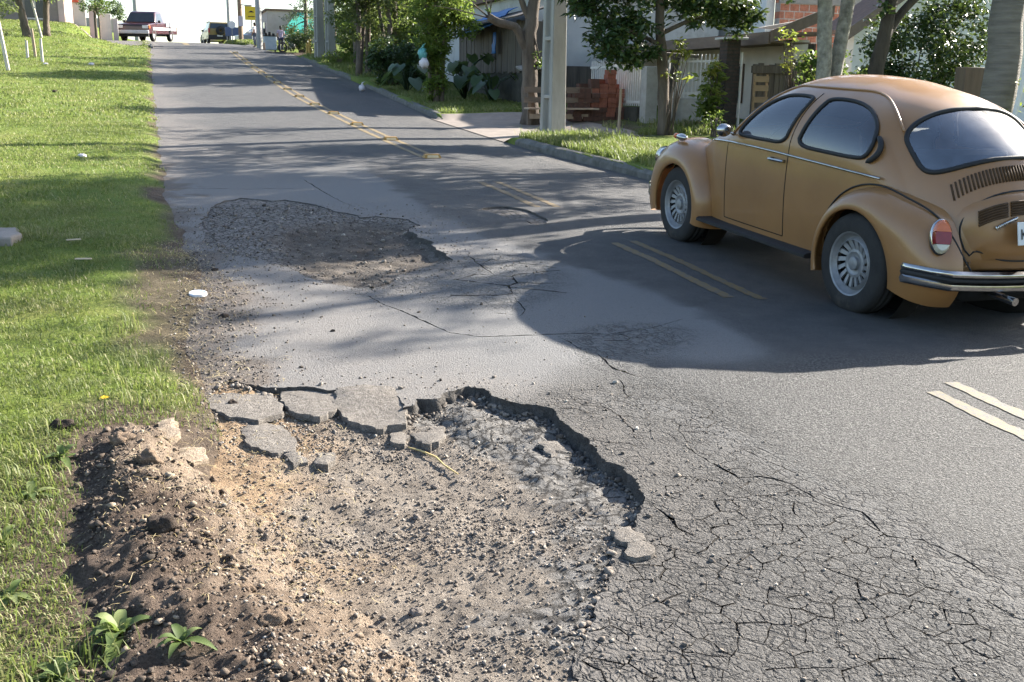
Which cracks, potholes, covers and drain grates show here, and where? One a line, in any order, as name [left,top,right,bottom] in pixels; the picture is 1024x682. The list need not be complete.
pothole [198,198,453,288]
crack [452,257,567,316]
crack [356,293,1024,682]
pothole [207,379,646,682]
